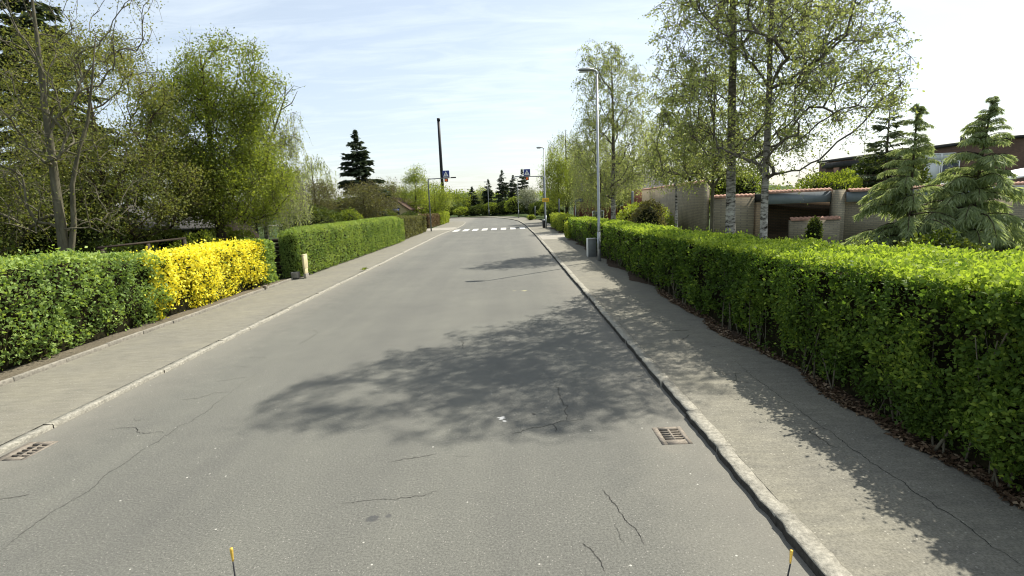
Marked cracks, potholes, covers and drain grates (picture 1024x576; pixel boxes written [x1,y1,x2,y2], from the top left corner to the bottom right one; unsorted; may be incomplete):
drain grate [652,426,693,445]
drain grate [0,441,58,461]
